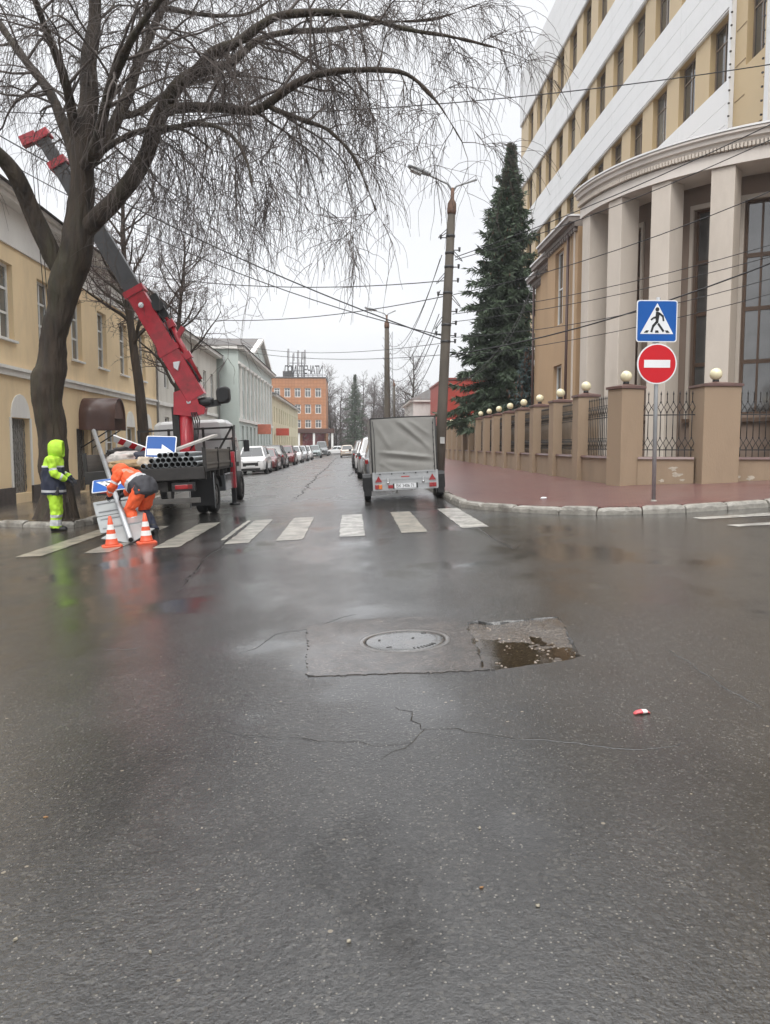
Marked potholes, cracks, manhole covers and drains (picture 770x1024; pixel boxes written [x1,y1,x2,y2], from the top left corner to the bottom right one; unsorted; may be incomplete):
pothole [467,617,581,670]
crack [178,521,253,592]
crack [224,708,681,759]
manhole cover [360,629,450,653]
